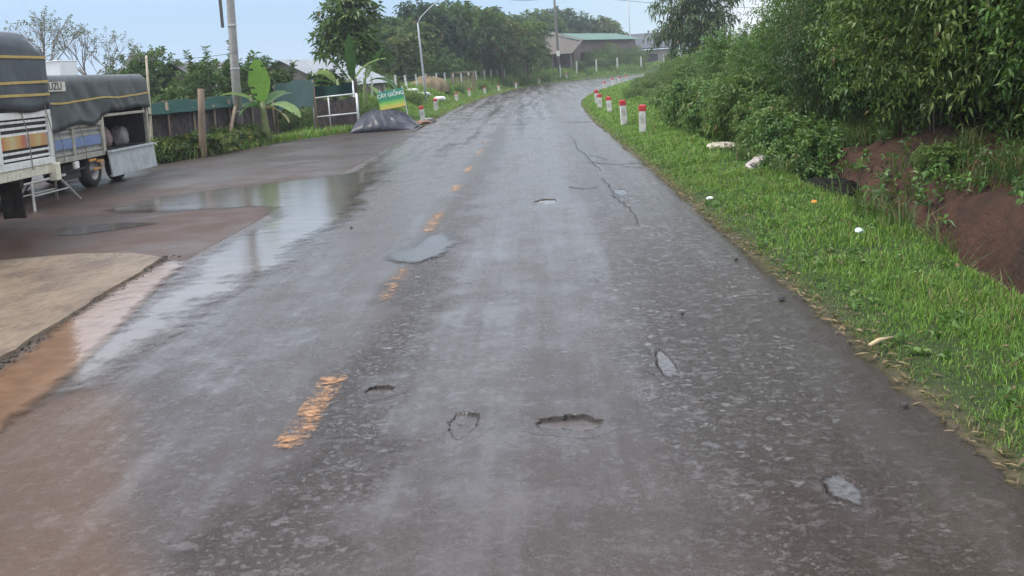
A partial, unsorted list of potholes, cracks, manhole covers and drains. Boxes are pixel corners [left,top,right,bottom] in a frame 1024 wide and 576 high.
pothole [430,406,496,448]
pothole [347,380,412,401]
pothole [801,463,887,519]
crack [569,135,641,223]
pothole [523,197,568,206]
pothole [517,408,622,438]
pothole [641,345,692,385]
